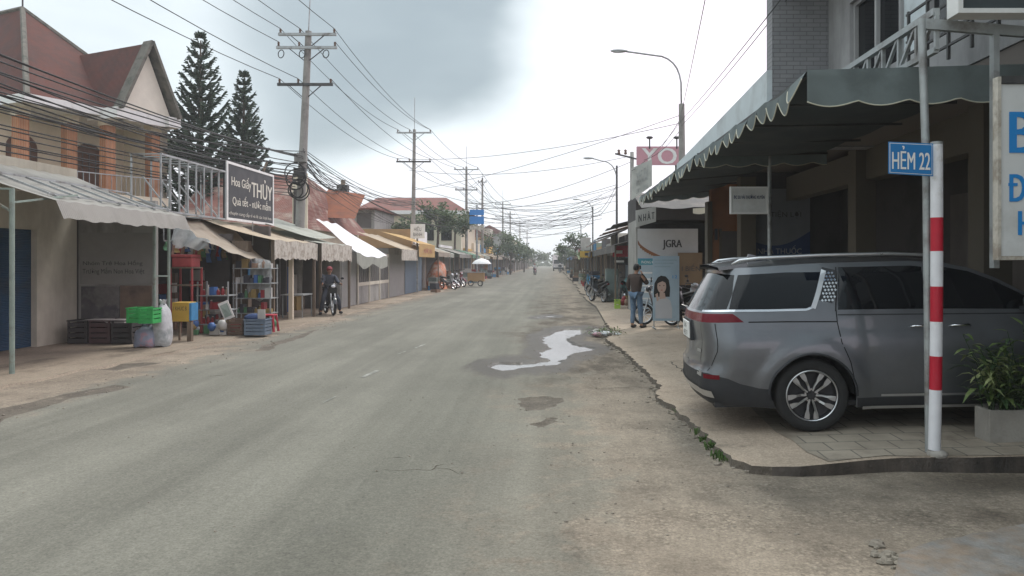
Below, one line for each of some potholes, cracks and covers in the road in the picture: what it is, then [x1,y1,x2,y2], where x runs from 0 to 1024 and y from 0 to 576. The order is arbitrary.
pothole [530,418,558,427]
pothole [487,328,598,371]
pothole [517,396,564,411]
